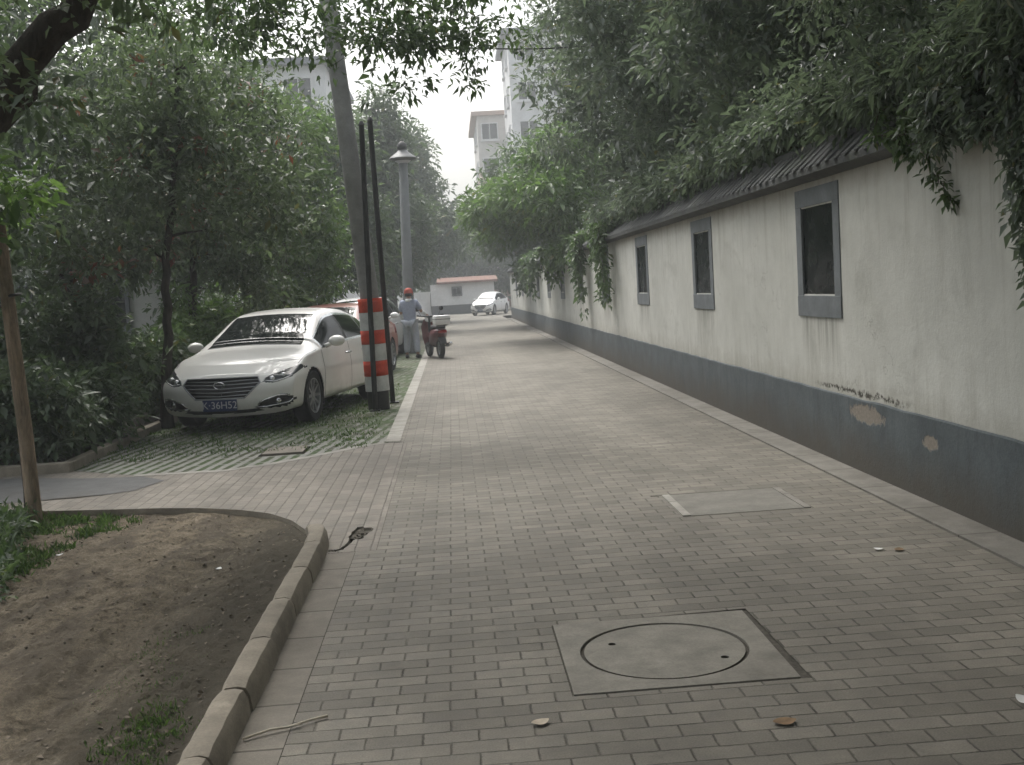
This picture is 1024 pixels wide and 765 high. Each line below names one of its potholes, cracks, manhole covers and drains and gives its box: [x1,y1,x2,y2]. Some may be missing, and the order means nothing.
manhole cover [551,608,812,697]
utility cover [650,487,811,517]
